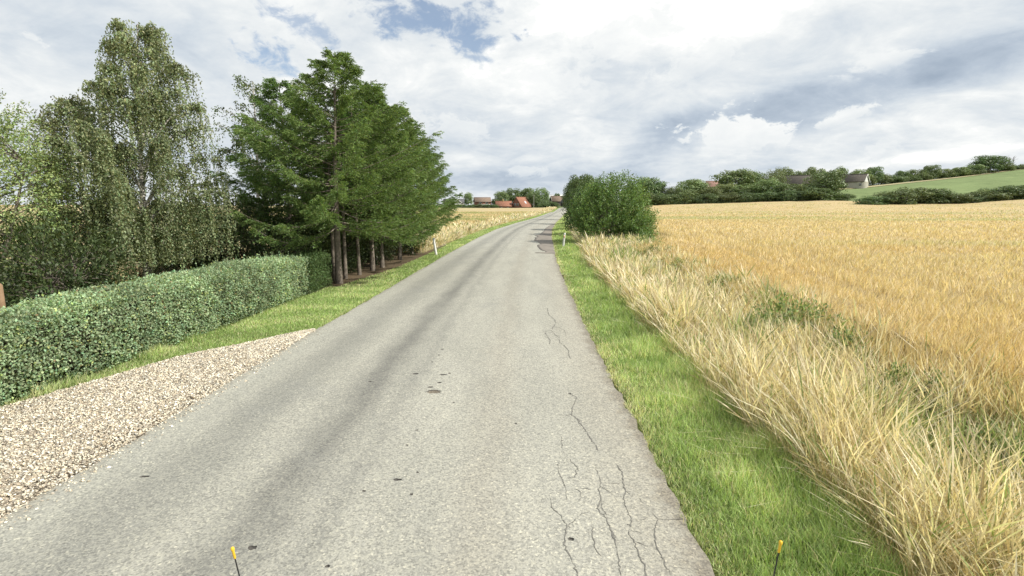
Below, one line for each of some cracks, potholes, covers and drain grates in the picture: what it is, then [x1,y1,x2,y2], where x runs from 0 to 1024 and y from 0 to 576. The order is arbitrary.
crack [551,437,686,576]
crack [568,394,598,450]
